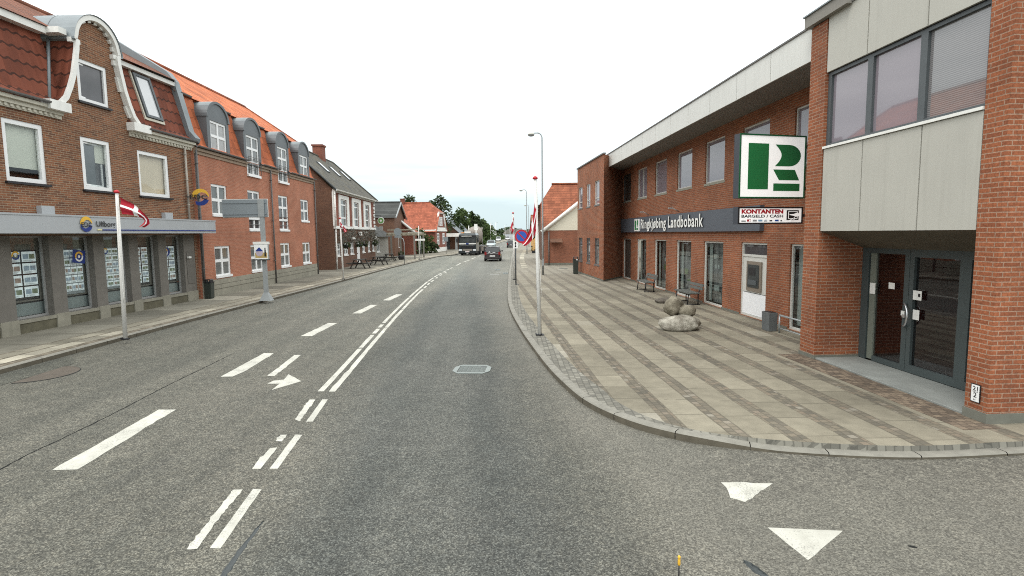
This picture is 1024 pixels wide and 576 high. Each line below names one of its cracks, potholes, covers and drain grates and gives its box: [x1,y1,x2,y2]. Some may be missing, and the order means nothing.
manhole cover [453,365,492,374]
manhole cover [12,366,81,384]
